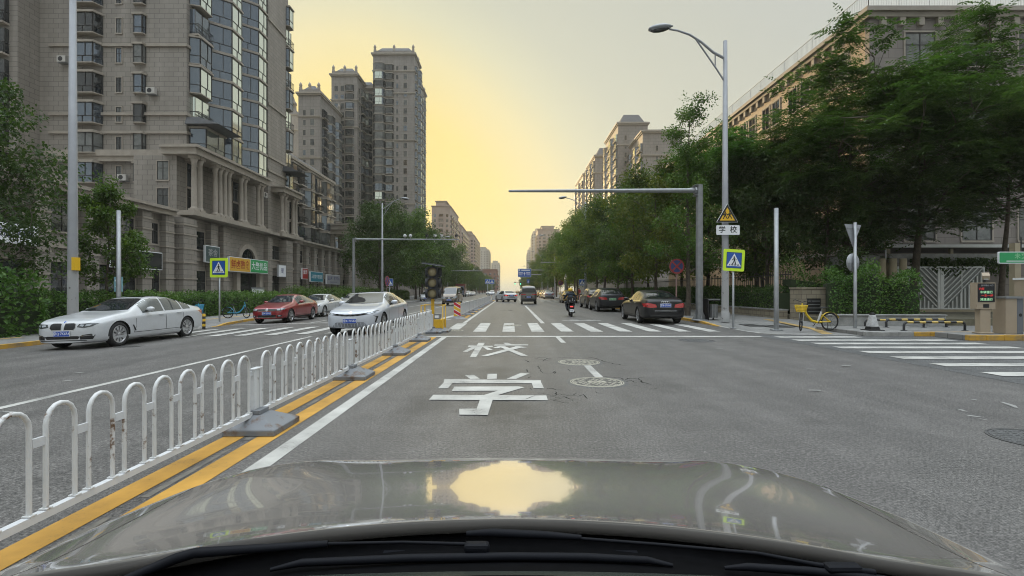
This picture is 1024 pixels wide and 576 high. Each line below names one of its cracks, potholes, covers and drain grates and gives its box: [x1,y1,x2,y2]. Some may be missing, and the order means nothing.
manhole cover [566,377,629,388]
manhole cover [984,428,1024,446]
crack [526,357,656,403]
